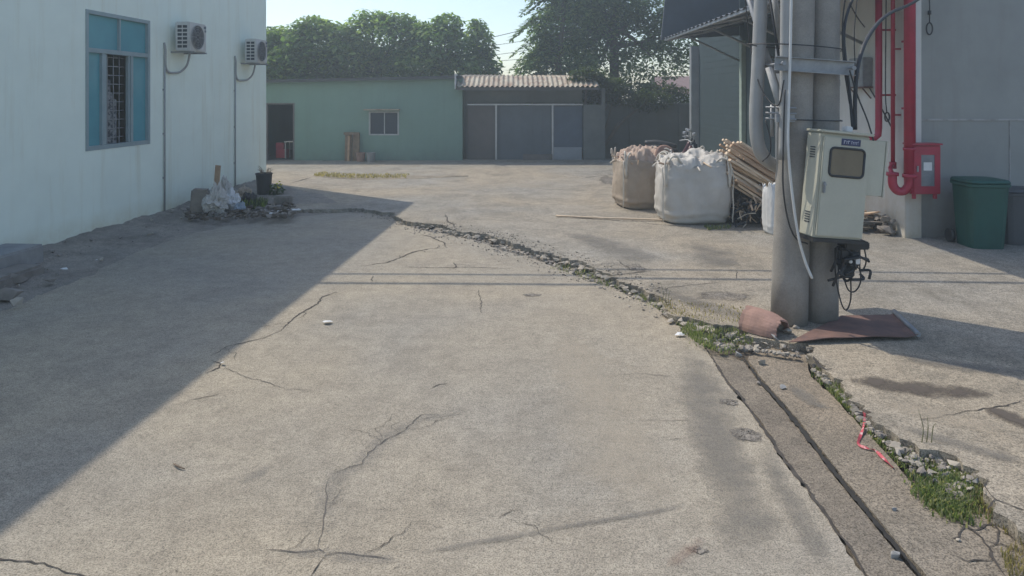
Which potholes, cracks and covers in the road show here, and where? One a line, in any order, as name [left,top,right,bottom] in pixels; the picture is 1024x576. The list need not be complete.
crack [334,413,447,473]
crack [269,481,414,574]
crack [209,292,335,390]
pothole [730,427,762,441]
crack [371,216,491,281]
crack [940,478,1024,575]
crack [0,558,85,576]
